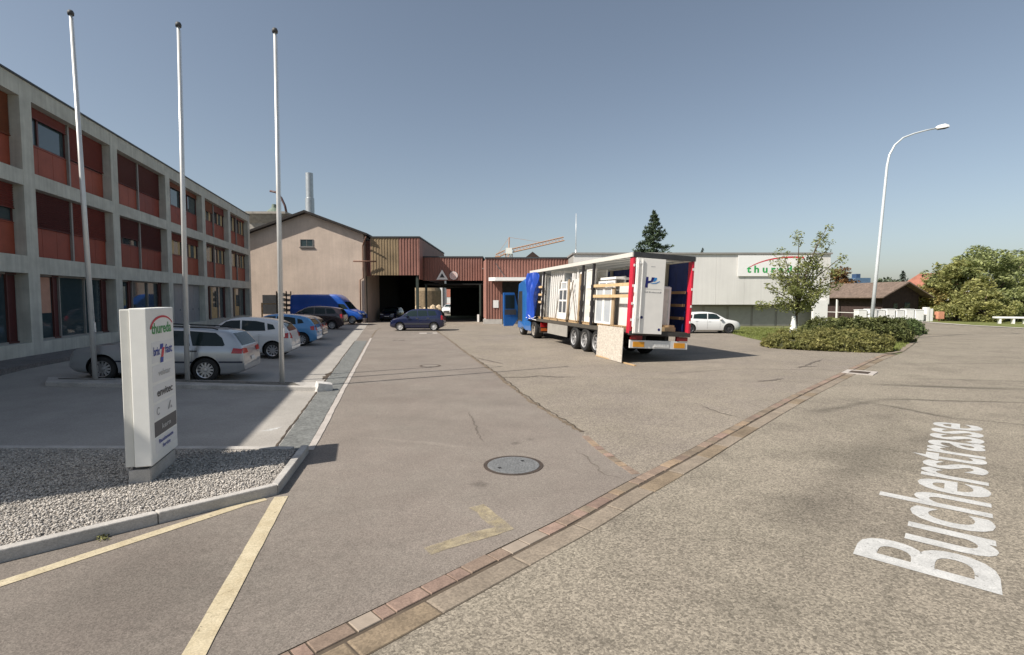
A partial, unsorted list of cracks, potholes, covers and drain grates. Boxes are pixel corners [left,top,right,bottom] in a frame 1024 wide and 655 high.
manhole cover [484,456,543,476]
